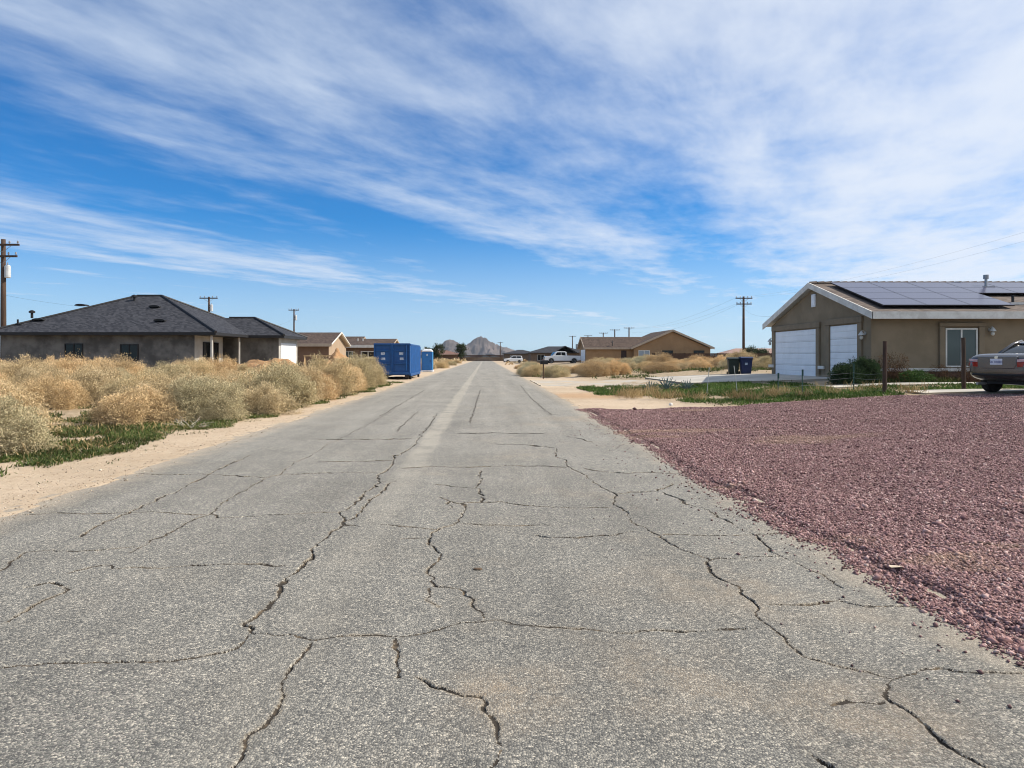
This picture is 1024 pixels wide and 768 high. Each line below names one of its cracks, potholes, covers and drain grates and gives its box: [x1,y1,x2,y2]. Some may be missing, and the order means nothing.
crack [0,399,1021,768]
